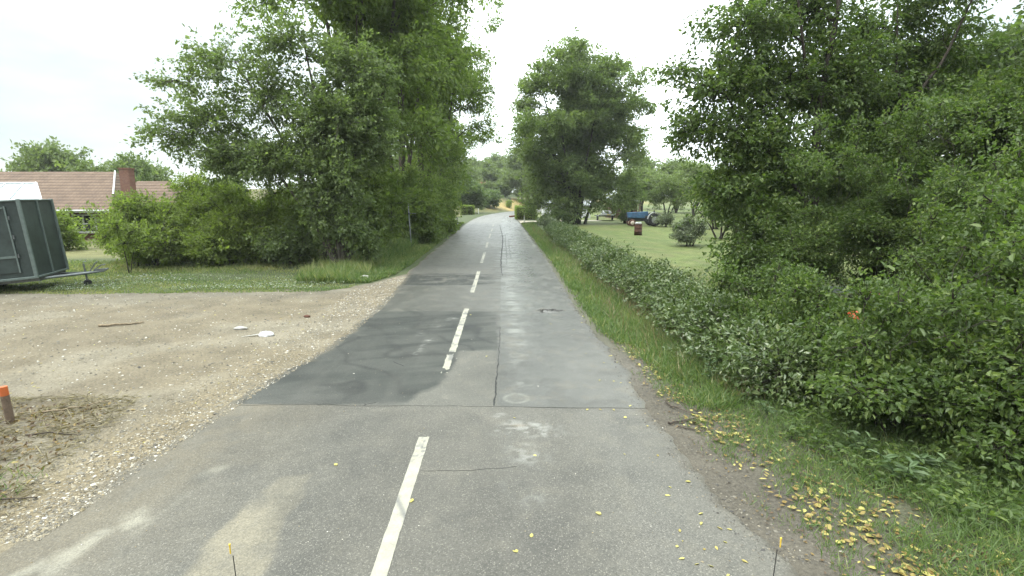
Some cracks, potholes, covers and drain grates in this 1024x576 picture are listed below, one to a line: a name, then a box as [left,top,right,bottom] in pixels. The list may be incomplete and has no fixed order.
crack [500,231,511,275]
crack [245,331,648,409]
